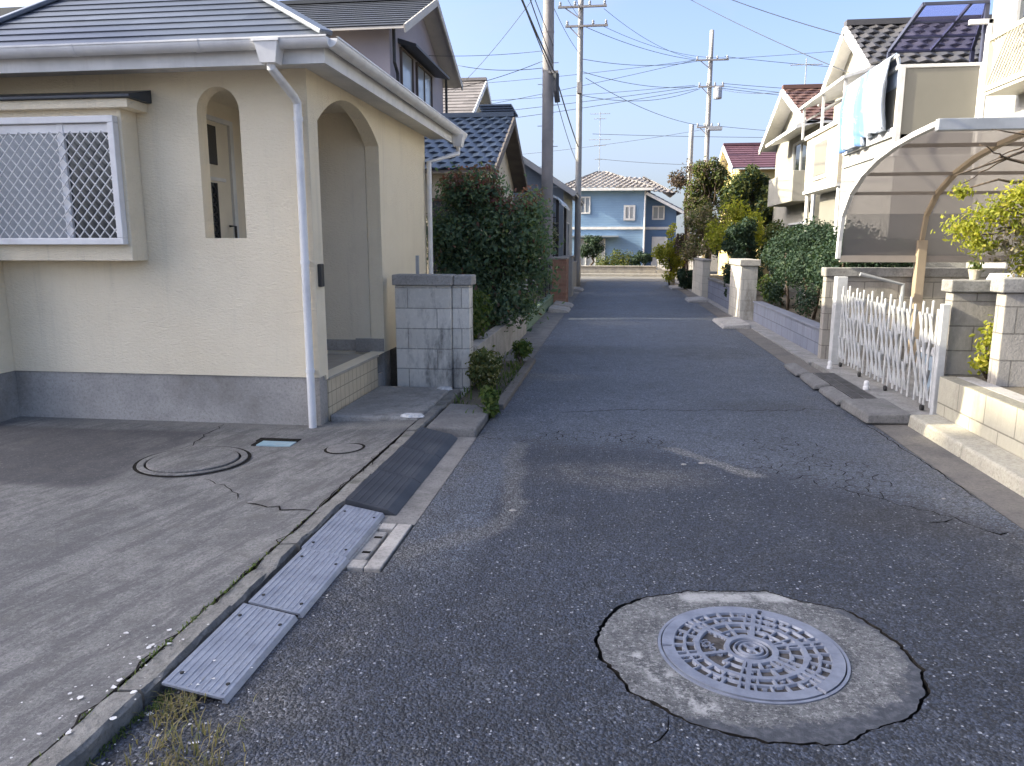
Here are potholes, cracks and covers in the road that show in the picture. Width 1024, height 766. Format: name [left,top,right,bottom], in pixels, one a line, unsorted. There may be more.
drain grate [813,372,877,399]
utility cover [132,446,252,477]
crack [742,437,1009,535]
manhole cover [657,606,851,705]
crack [27,446,389,766]
